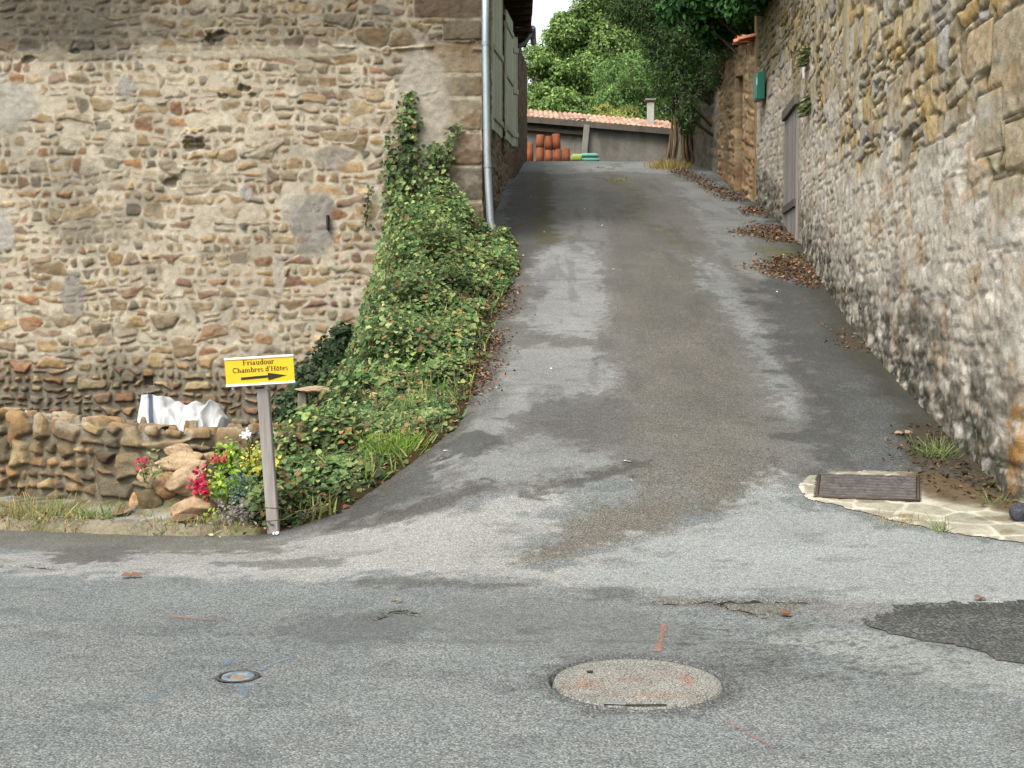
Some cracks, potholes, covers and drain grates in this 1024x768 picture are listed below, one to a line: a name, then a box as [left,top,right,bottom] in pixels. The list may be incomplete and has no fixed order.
manhole cover [544,657,733,713]
crack [663,600,808,619]
drain grate [815,473,920,502]
crack [376,610,418,621]
utility cover [216,670,260,683]
